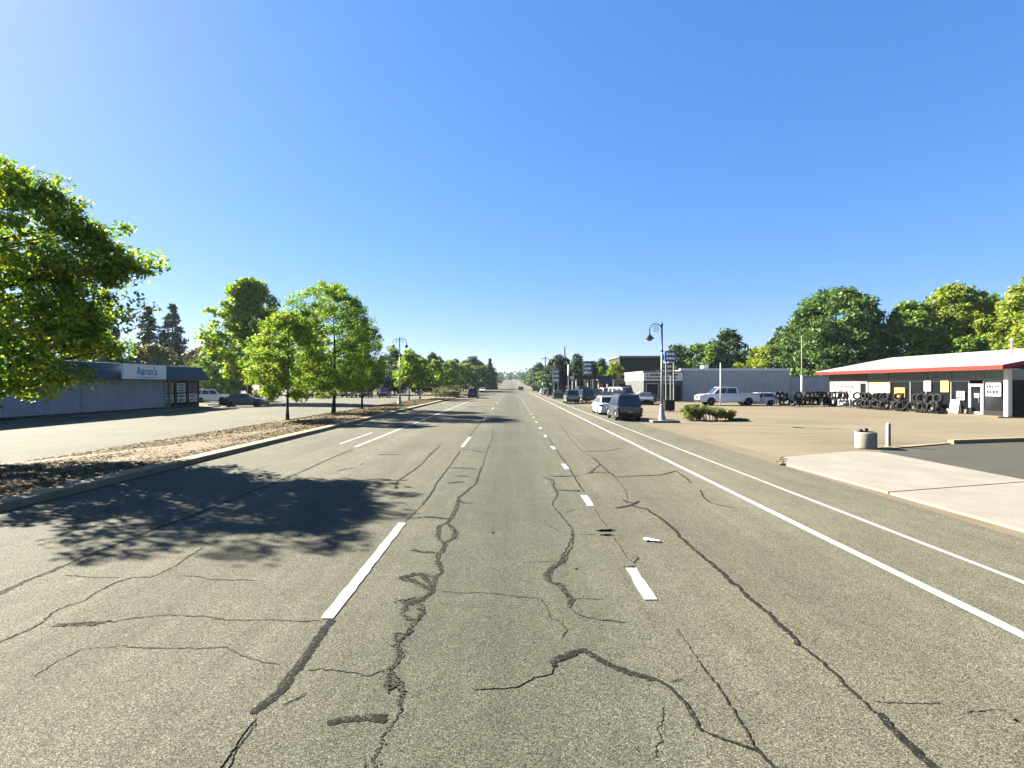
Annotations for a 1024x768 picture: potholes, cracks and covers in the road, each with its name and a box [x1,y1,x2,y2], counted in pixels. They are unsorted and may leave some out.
crack [32,431,778,768]
